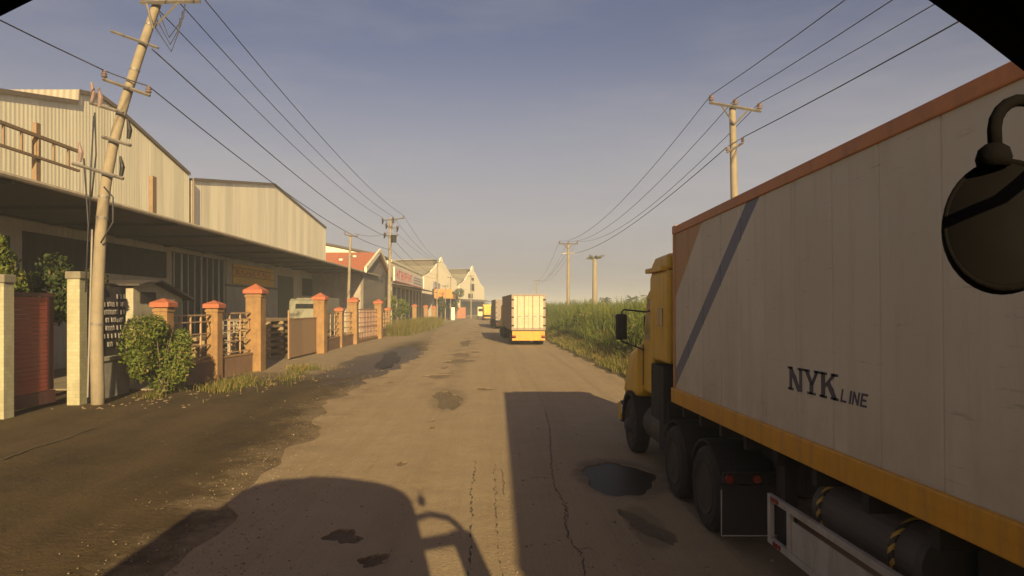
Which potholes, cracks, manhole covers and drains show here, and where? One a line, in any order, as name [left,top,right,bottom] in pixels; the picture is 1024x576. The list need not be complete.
pothole [357,553,391,568]
pothole [432,391,463,410]
crack [533,411,593,576]
pothole [581,461,658,497]
pothole [321,529,364,544]
pothole [617,509,679,546]
crack [467,461,505,576]
